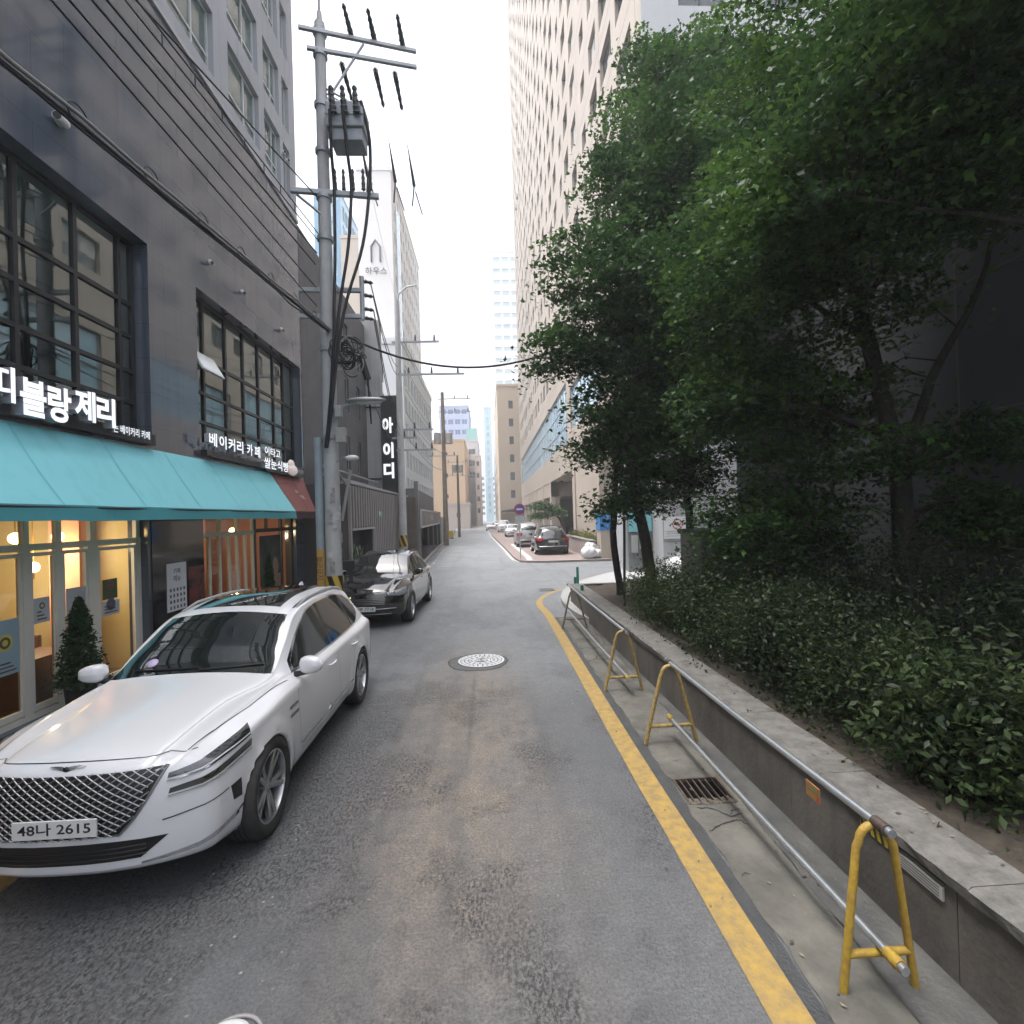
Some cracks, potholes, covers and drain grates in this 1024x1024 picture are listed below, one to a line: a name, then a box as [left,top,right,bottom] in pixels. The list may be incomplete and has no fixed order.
drain grate [672,776,738,805]
crack [698,807,747,831]
manhole cover [448,653,508,671]
